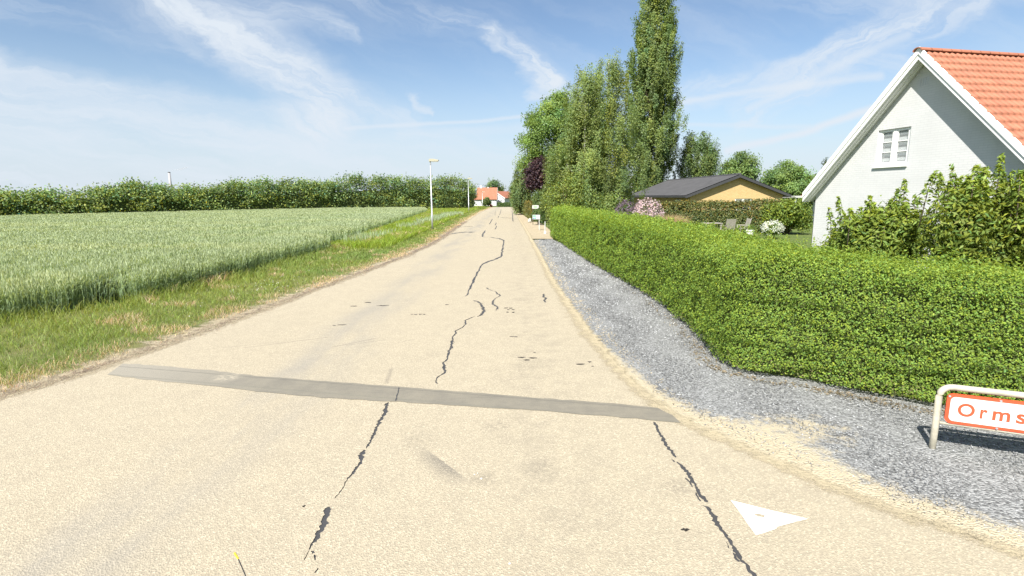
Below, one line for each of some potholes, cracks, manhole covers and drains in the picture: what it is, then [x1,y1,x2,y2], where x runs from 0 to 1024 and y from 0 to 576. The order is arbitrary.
crack [435,211,514,384]
crack [304,403,389,573]
